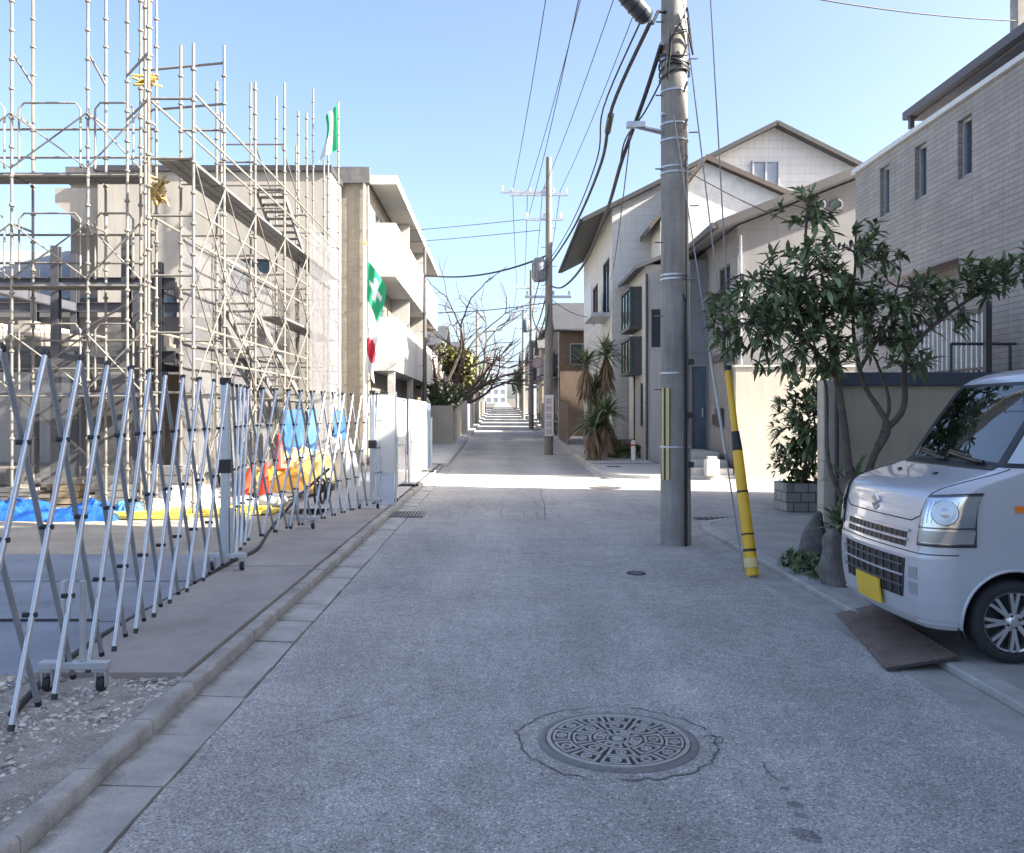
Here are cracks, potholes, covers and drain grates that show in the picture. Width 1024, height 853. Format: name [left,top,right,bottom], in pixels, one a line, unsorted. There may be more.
manhole cover [538,713,700,773]
drain grate [389,511,426,519]
crack [440,491,561,518]
